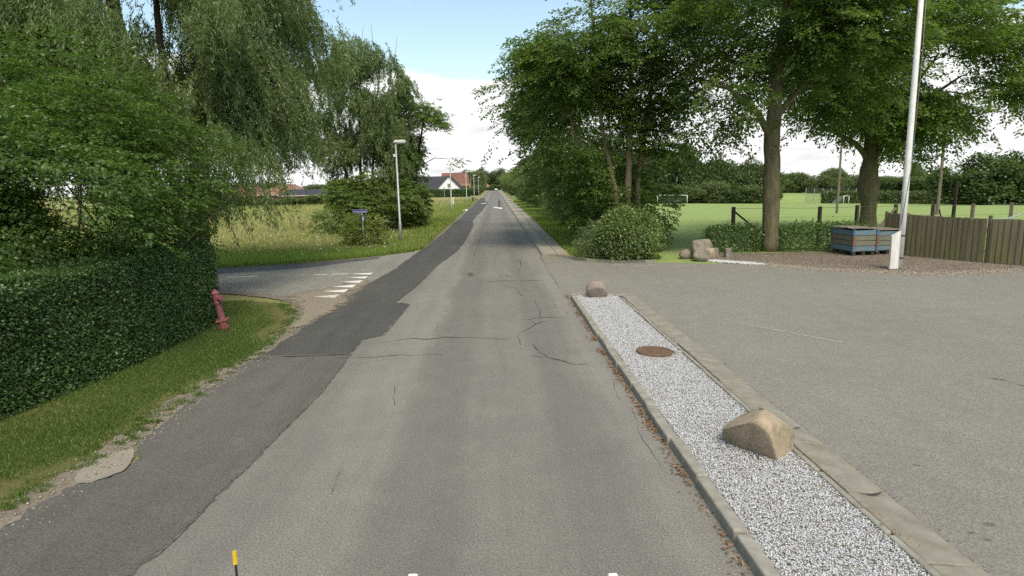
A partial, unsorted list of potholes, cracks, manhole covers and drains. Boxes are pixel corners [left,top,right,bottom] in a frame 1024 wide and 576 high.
manhole cover [636,346,679,359]
crack [363,325,492,358]
crack [486,262,571,364]
